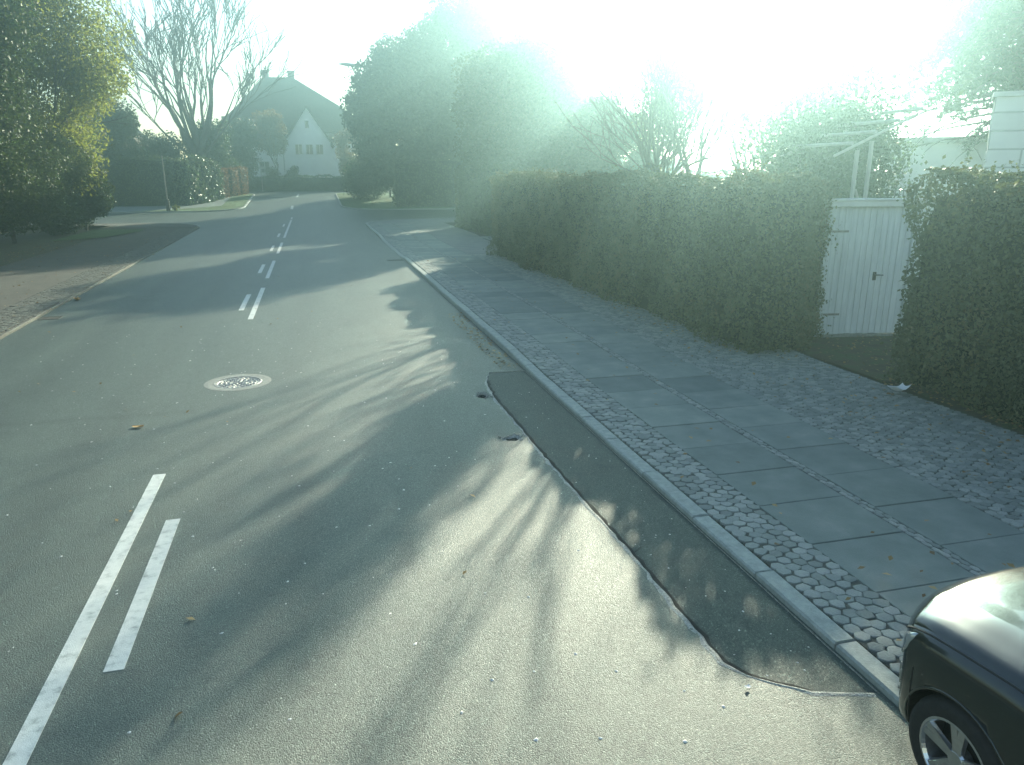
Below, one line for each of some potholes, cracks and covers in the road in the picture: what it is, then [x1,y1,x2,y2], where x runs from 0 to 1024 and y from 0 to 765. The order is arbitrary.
pothole [498,432,526,441]
manhole cover [204,374,271,391]
